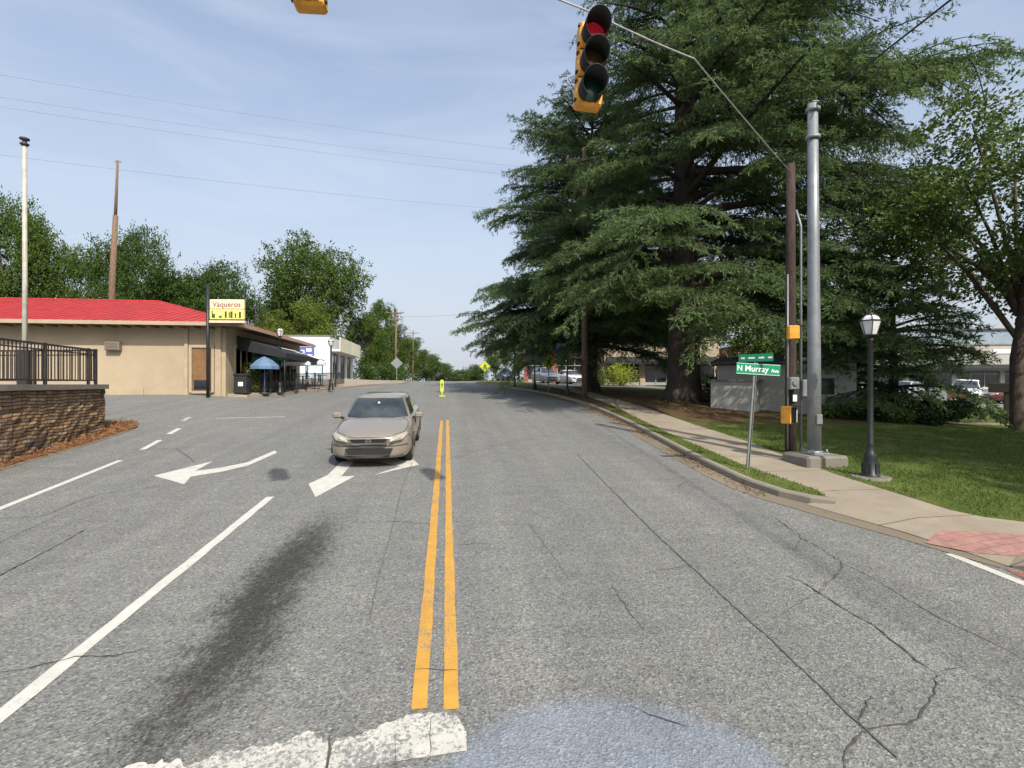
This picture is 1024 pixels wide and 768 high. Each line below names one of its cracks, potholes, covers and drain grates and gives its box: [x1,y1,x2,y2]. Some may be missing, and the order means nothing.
crack [1,647,148,672]
crack [579,456,1023,768]
crack [0,529,85,575]
crack [530,525,642,627]
